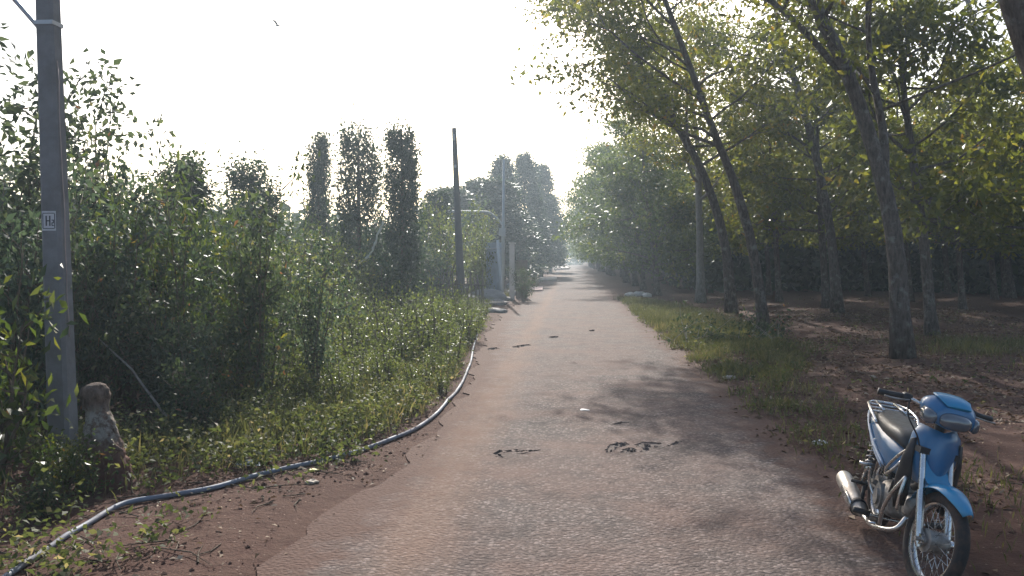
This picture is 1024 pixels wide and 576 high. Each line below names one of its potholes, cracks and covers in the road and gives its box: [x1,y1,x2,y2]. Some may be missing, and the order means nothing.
pothole [605,441,682,454]
